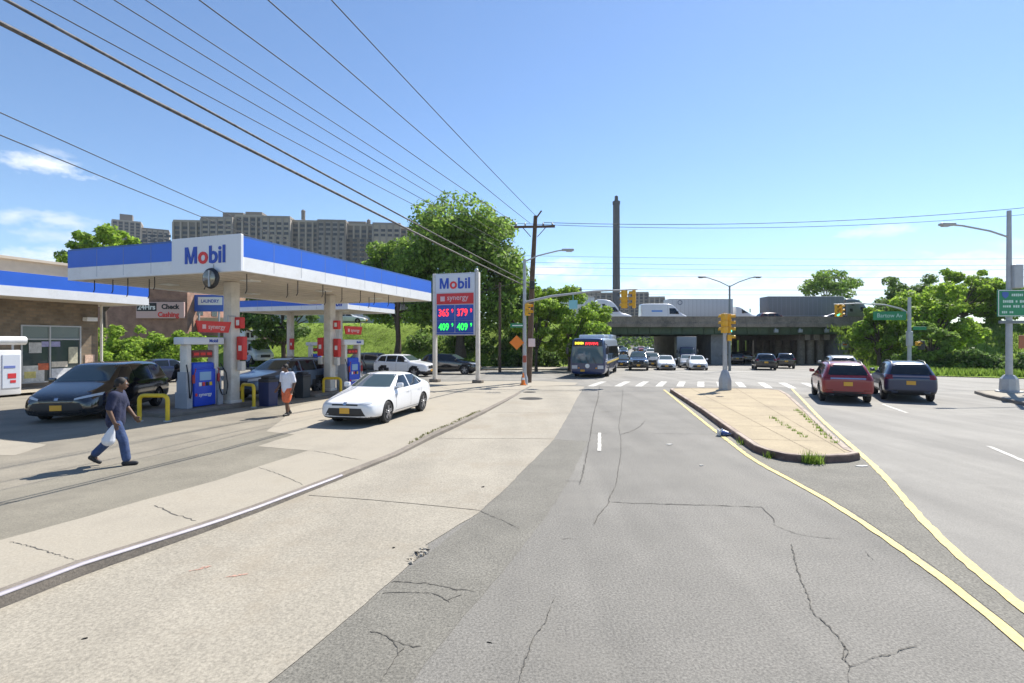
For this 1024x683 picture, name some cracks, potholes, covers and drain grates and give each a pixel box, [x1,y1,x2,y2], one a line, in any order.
crack [519,600,554,681]
pothole [408,547,430,564]
crack [370,631,422,679]
crack [579,386,917,681]
crack [385,581,472,601]
